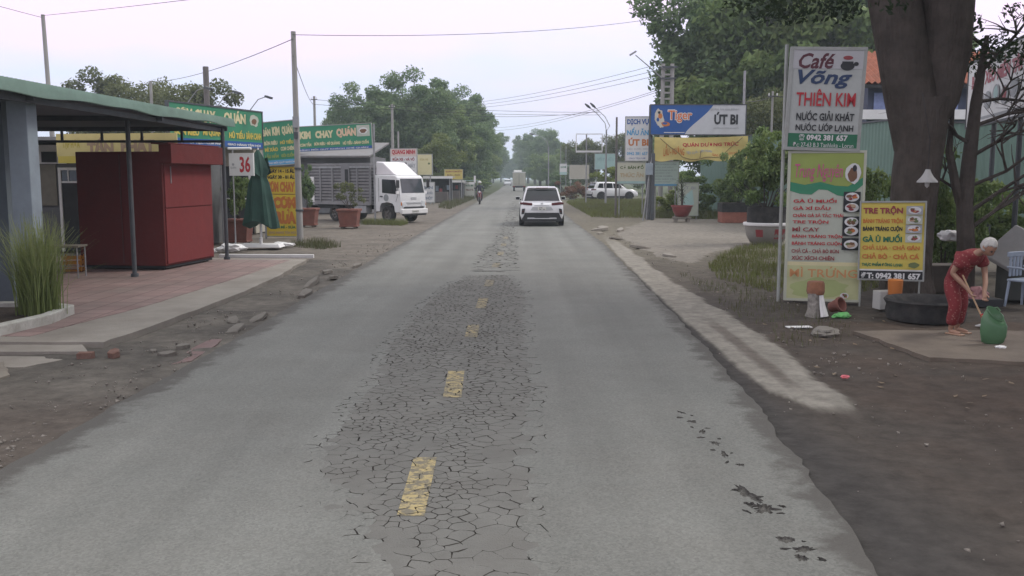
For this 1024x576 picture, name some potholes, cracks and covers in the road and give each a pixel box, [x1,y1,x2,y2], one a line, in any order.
pothole [730,484,786,514]
pothole [775,536,827,562]
pothole [677,411,744,466]
crack [473,201,520,269]
crack [299,275,559,576]
